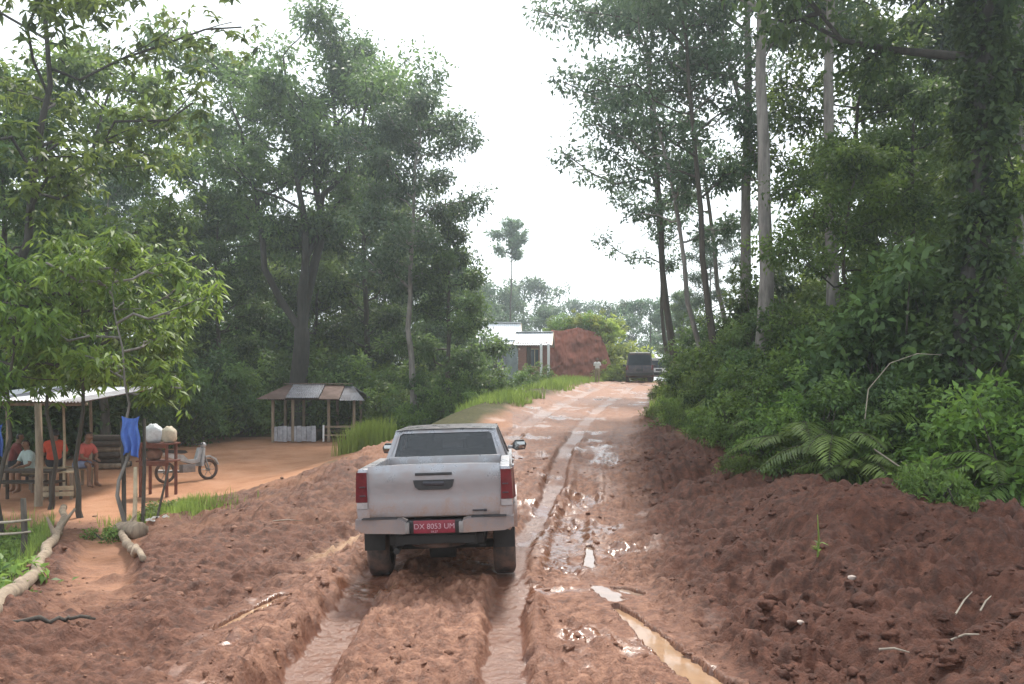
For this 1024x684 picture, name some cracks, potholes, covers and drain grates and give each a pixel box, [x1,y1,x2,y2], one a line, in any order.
pothole [580,544,598,568]
